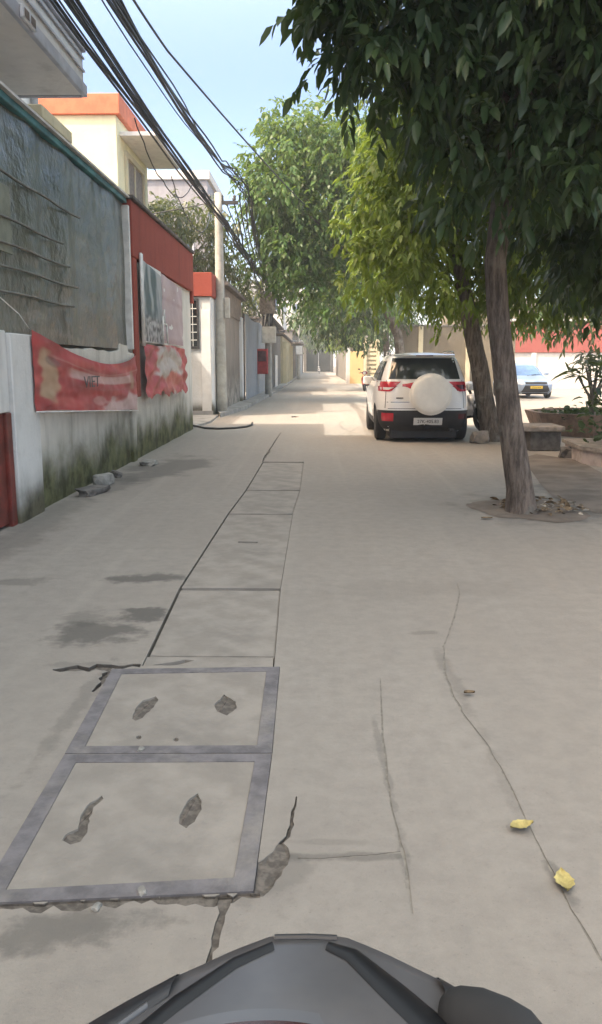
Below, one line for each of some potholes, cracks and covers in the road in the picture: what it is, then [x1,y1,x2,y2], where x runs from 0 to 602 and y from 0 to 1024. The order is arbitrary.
crack [279,797,297,845]
manhole cover [65,667,280,754]
crack [206,898,232,962]
manhole cover [0,754,272,905]
crack [442,584,602,963]
crack [54,664,140,692]
